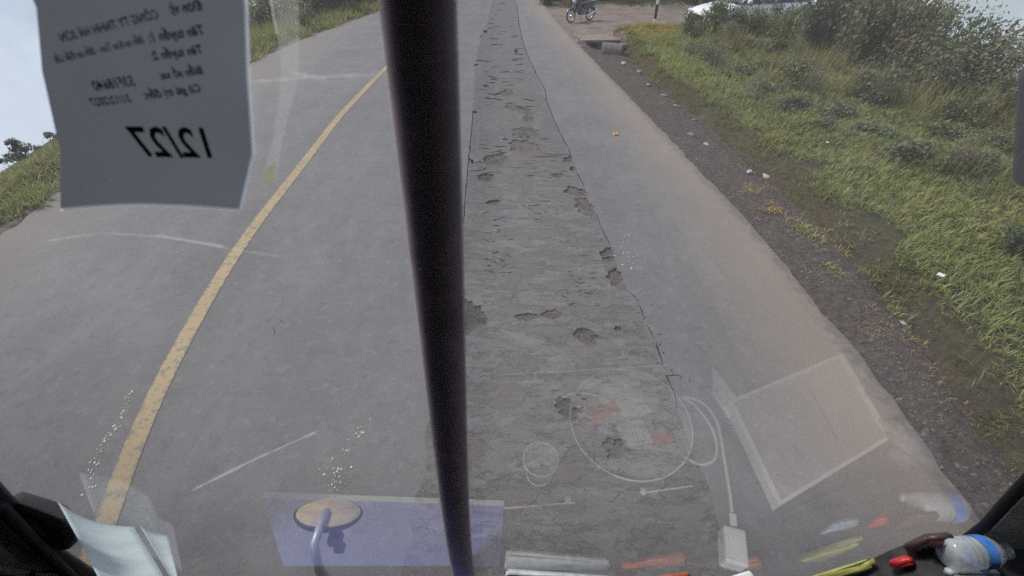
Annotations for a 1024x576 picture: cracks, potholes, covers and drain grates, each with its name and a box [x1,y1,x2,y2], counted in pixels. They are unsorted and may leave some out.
pothole [540,309,562,320]
pothole [514,312,540,321]
crack [463,1,568,224]
pothole [508,139,541,154]
pothole [465,299,489,335]
pothole [483,153,507,167]
pothole [602,437,632,460]
pothole [572,327,600,345]
pothole [554,397,582,421]
pothole [563,185,589,197]
pothole [606,268,623,287]
